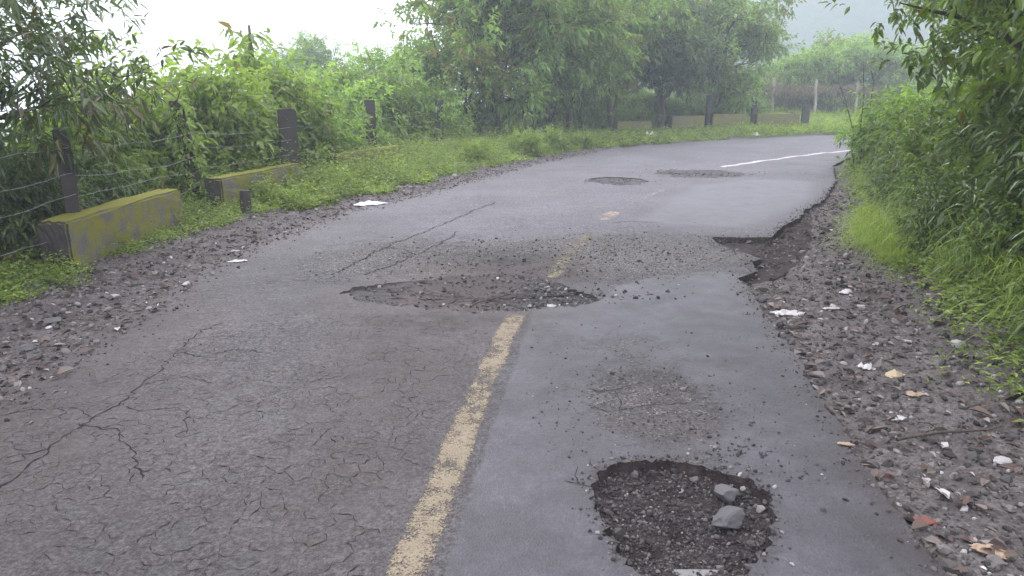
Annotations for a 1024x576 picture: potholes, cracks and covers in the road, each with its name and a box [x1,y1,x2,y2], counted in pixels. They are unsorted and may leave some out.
pothole [654,169,744,178]
pothole [339,274,599,314]
pothole [591,459,778,576]
pothole [722,219,812,284]
pothole [588,177,648,186]
crack [0,312,477,576]
crack [292,202,568,284]
